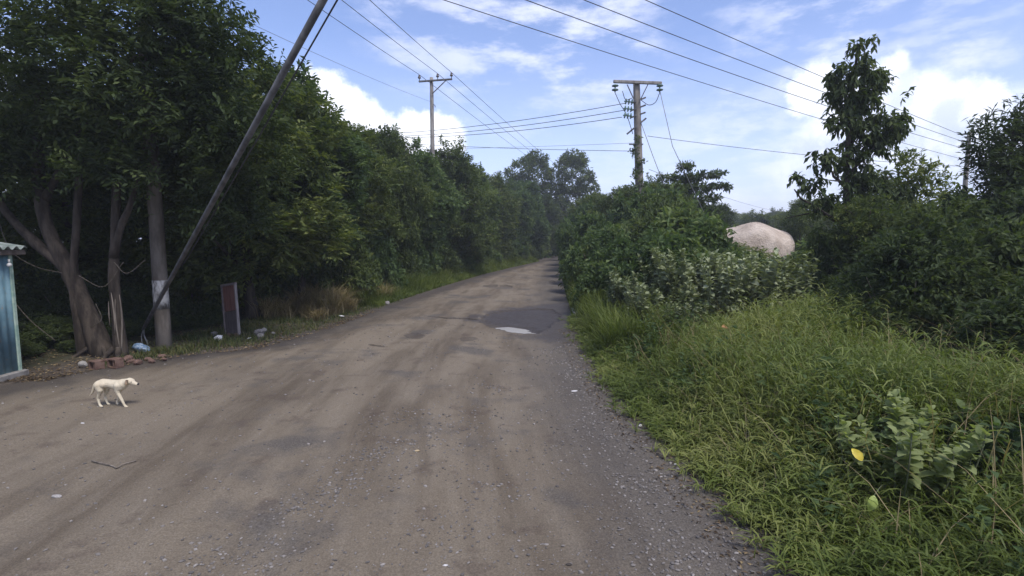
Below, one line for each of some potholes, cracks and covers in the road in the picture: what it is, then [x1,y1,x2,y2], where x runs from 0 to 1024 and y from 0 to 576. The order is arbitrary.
pothole [478,308,562,334]
